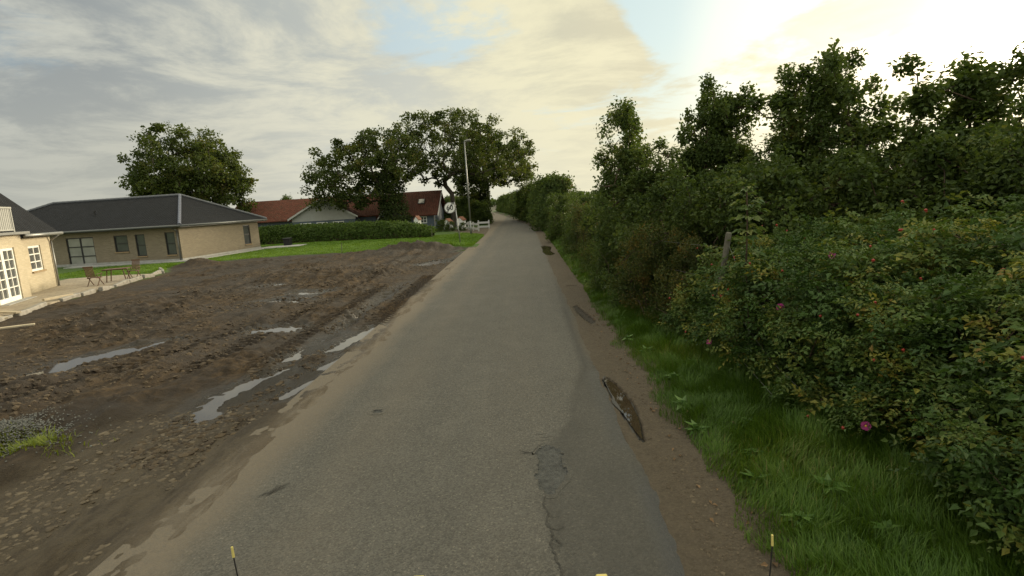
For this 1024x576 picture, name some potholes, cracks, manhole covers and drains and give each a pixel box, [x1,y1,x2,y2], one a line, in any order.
pothole [603,376,644,442]
crack [542,495,564,576]
pothole [574,306,595,324]
